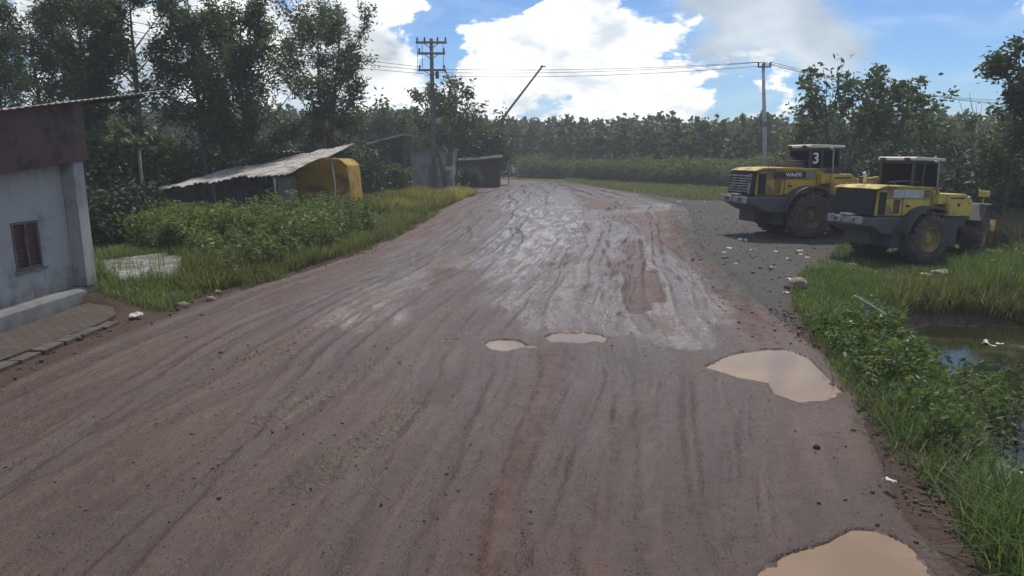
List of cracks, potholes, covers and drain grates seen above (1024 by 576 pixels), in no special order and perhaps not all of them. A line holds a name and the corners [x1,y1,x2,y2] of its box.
pothole [693,346,853,403]
pothole [737,521,945,576]
pothole [545,331,610,344]
pothole [482,337,544,351]
